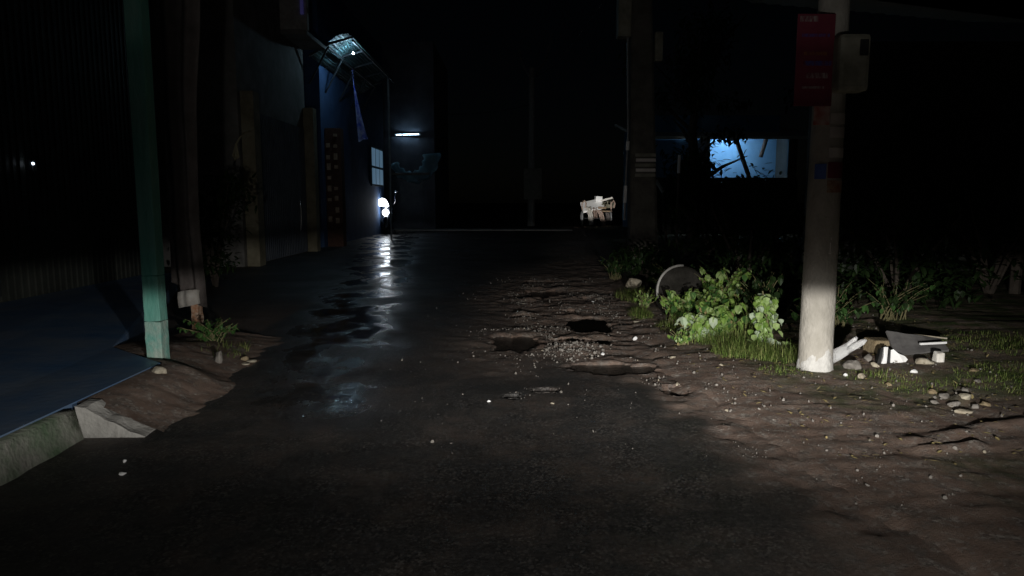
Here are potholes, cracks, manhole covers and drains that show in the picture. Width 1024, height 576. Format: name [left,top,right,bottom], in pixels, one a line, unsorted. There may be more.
pothole [562,314,617,335]
pothole [483,332,552,354]
pothole [656,383,692,397]
pothole [551,360,667,376]
